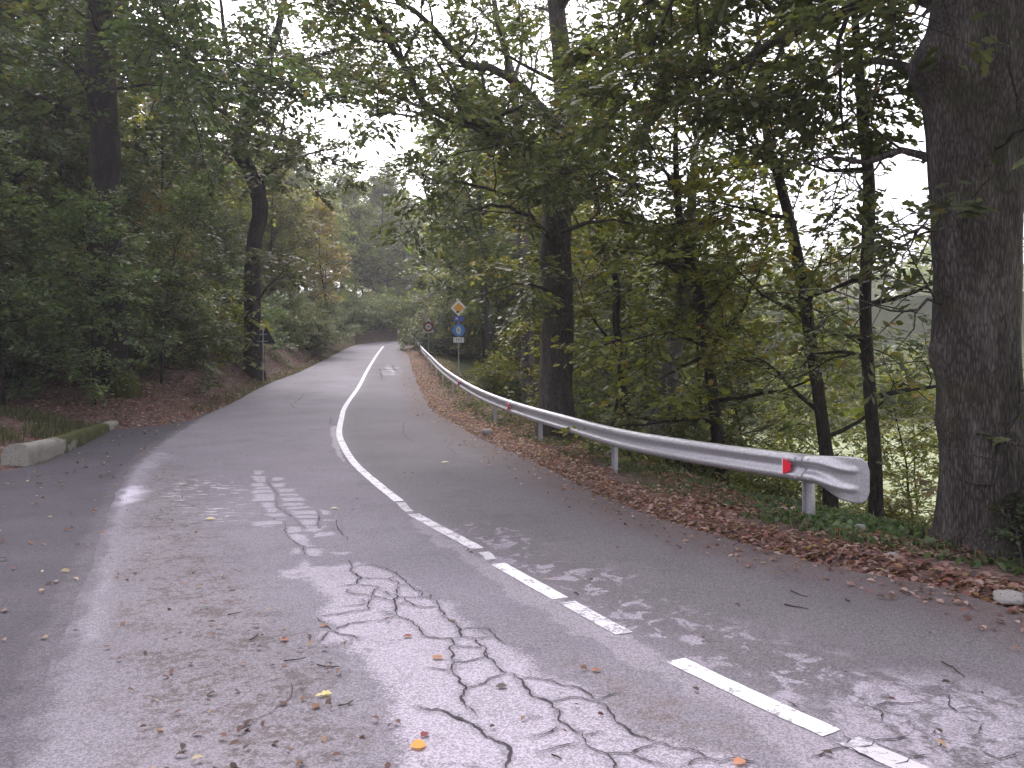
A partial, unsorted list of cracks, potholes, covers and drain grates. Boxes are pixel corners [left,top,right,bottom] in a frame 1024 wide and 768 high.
crack [812,692,1016,764]
crack [317,559,756,768]
crack [260,483,348,557]
